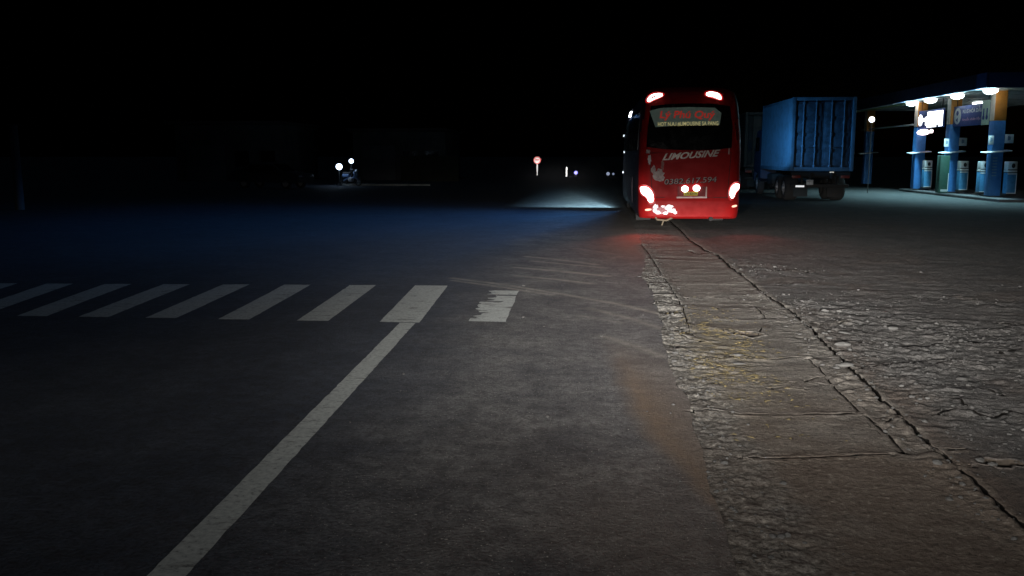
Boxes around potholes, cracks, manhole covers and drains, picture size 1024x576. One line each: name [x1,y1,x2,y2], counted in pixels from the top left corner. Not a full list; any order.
crack [633,218,1024,535]
